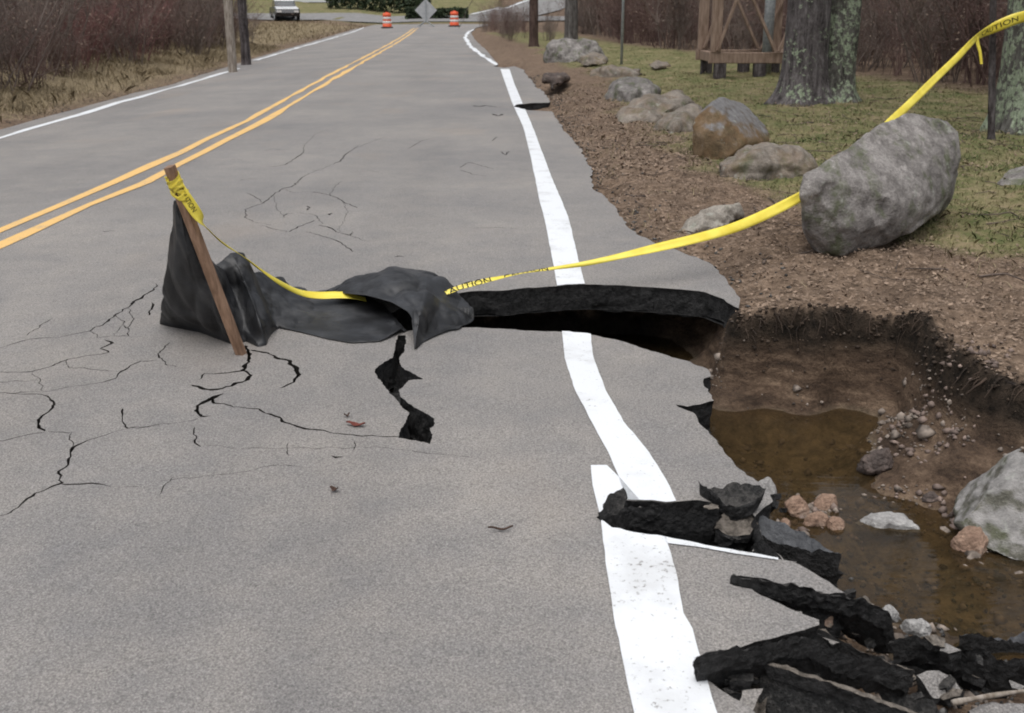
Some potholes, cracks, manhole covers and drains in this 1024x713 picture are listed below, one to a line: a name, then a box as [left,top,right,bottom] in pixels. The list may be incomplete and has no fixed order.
crack [231,136,376,252]
crack [0,283,654,516]
